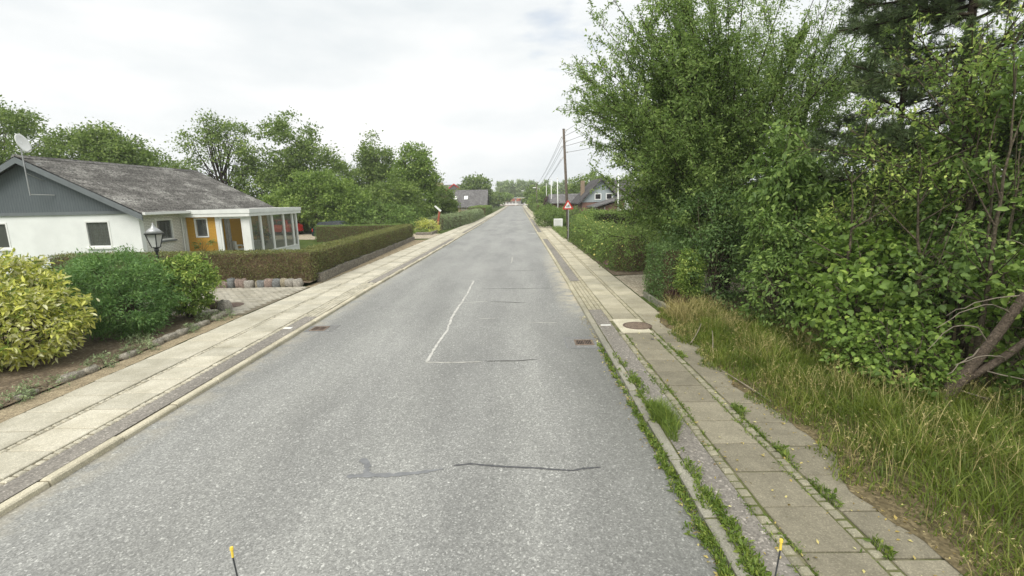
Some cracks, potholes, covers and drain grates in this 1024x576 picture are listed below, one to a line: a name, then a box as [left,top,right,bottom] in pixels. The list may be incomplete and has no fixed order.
manhole cover [613,319,652,333]
